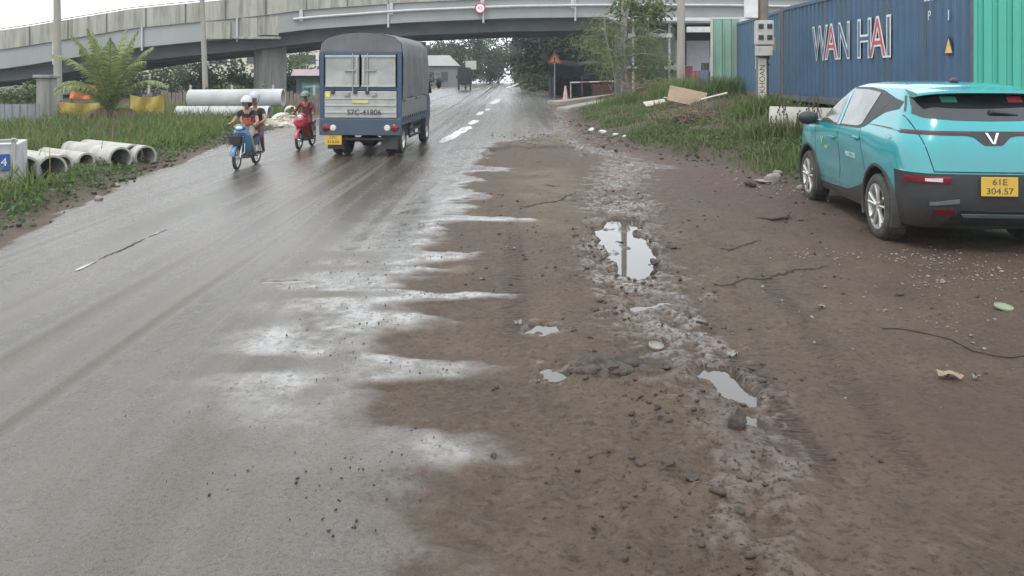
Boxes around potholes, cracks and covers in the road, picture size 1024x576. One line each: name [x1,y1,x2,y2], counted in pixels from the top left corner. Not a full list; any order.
pothole [585,213,669,281]
pothole [683,357,768,409]
pothole [516,320,569,337]
pothole [527,362,576,384]
crack [520,184,577,207]
